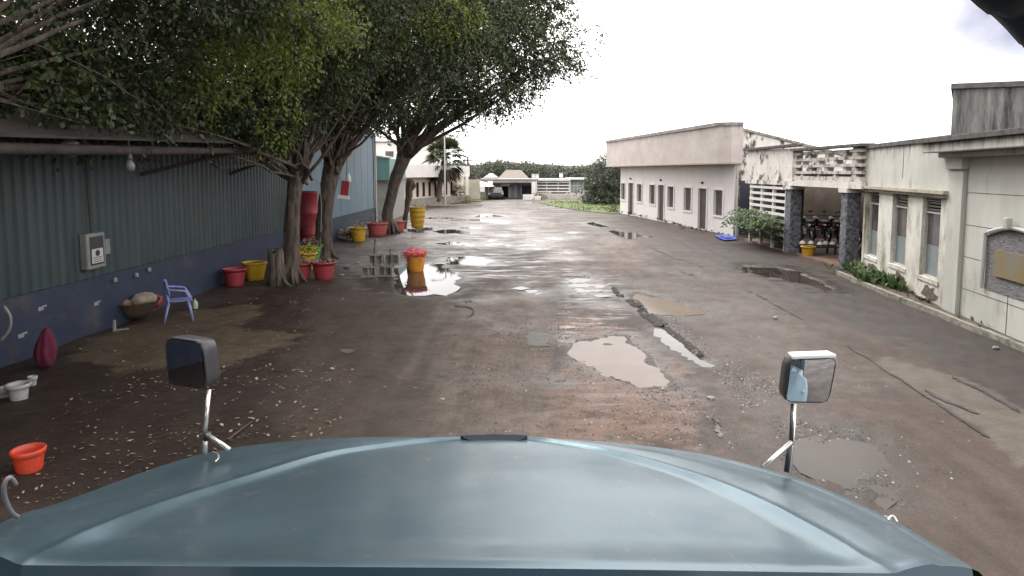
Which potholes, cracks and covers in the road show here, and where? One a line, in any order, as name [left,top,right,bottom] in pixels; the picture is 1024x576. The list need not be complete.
pothole [736,265,834,291]
pothole [629,291,709,316]
pothole [567,335,678,391]
